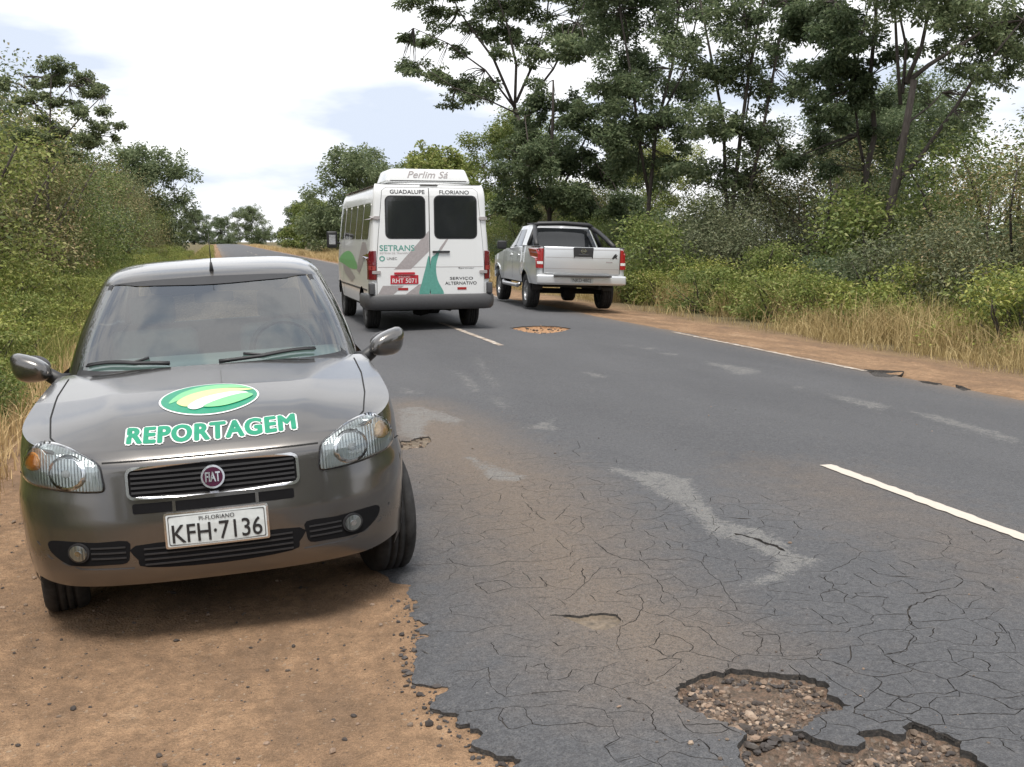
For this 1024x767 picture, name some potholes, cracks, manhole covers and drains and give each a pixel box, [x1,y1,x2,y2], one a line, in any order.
pothole [513,325,568,334]
crack [799,578,1010,741]
pothole [739,729,977,767]
pothole [678,673,843,743]
pothole [400,437,431,450]
crack [533,497,794,751]
pothole [864,369,904,377]
pothole [565,615,621,632]
